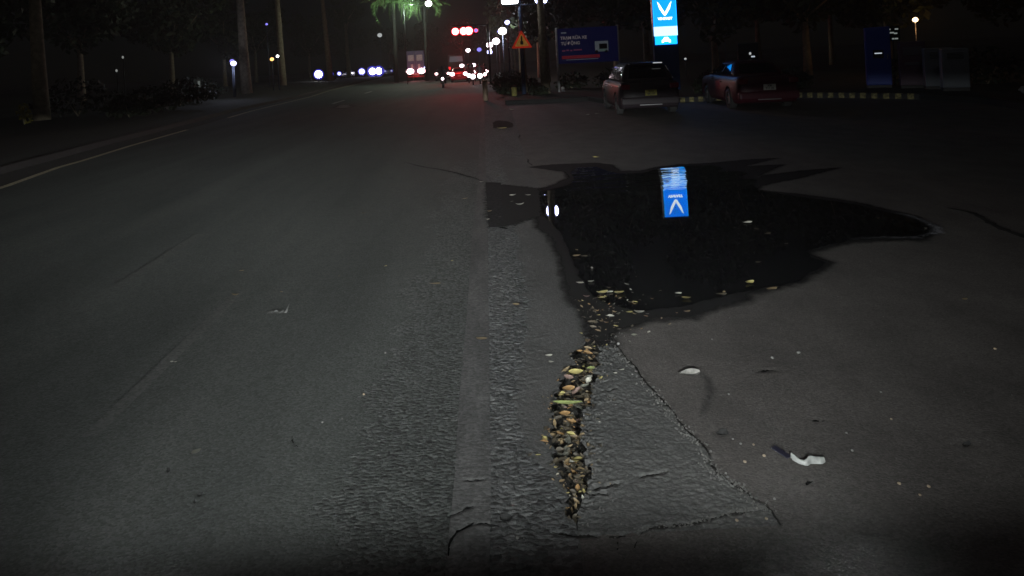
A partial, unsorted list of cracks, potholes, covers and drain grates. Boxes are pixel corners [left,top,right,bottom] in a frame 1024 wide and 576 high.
pothole [493,120,513,129]
crack [948,207,1024,238]
